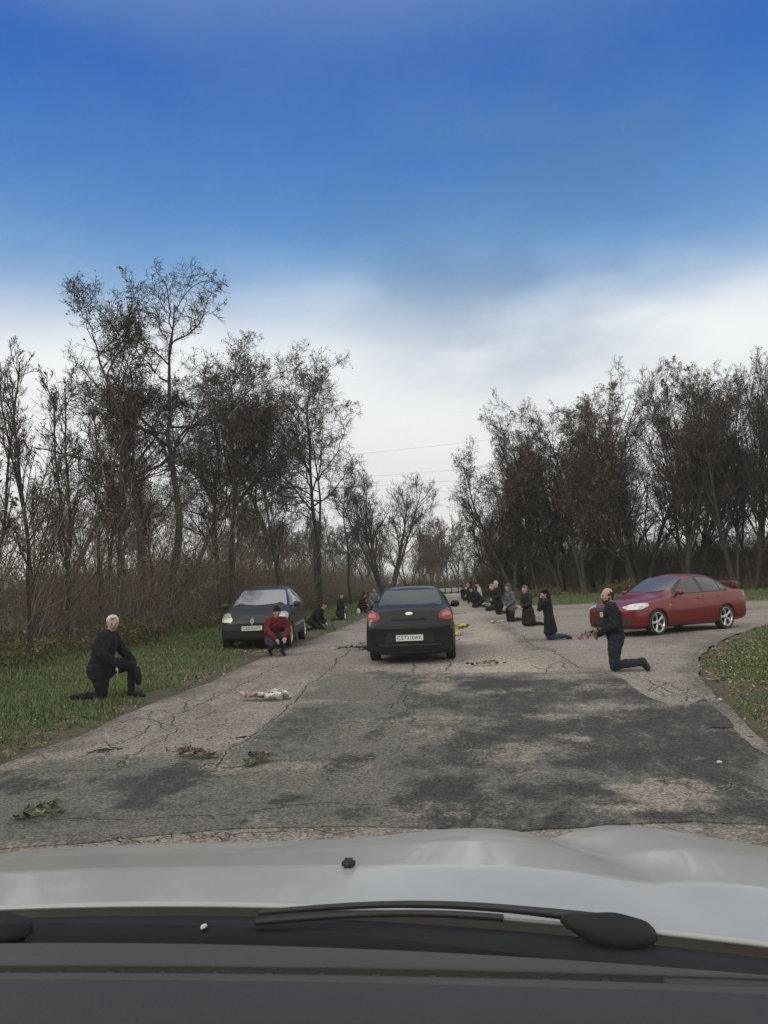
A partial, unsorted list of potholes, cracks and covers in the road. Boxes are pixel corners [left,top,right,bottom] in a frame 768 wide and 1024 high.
crack [645,679,702,701]
crack [520,635,603,672]
crack [3,664,285,776]
crack [263,658,516,732]
